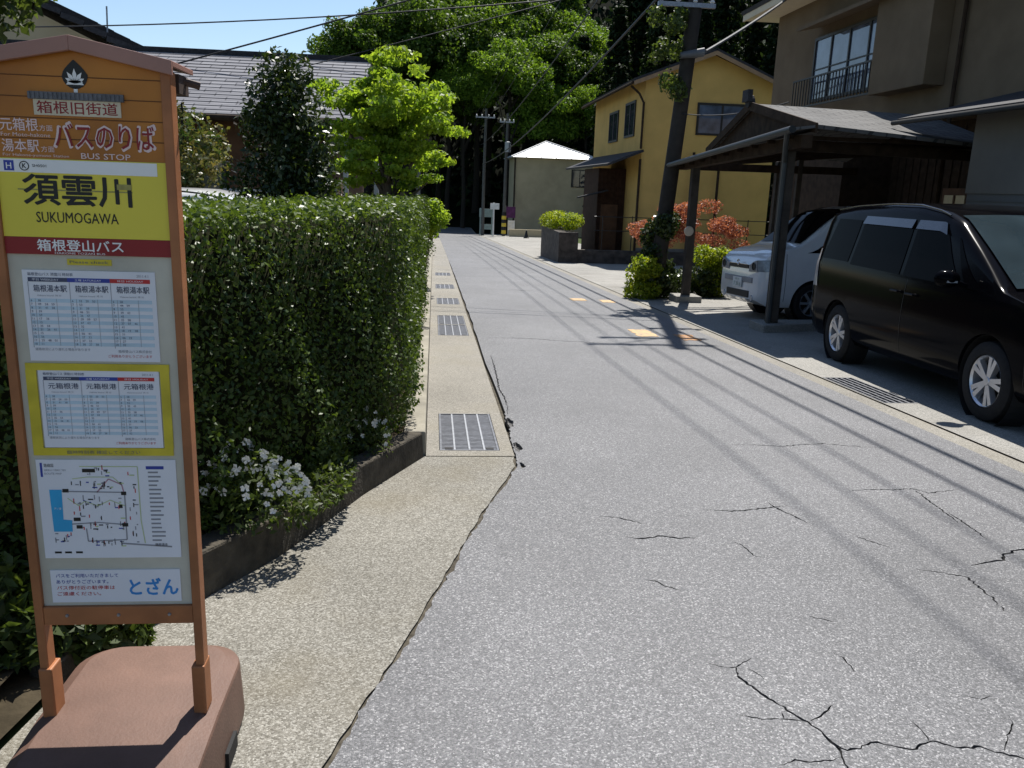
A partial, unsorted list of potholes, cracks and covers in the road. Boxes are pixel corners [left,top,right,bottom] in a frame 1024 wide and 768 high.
drain grate [438,315,465,325]
drain grate [823,377,916,403]
crack [491,358,508,414]
drain grate [438,324,469,336]
crack [864,488,1024,611]
crack [713,658,1024,768]
crack [601,516,695,539]
crack [714,503,807,523]
drain grate [439,414,499,451]
